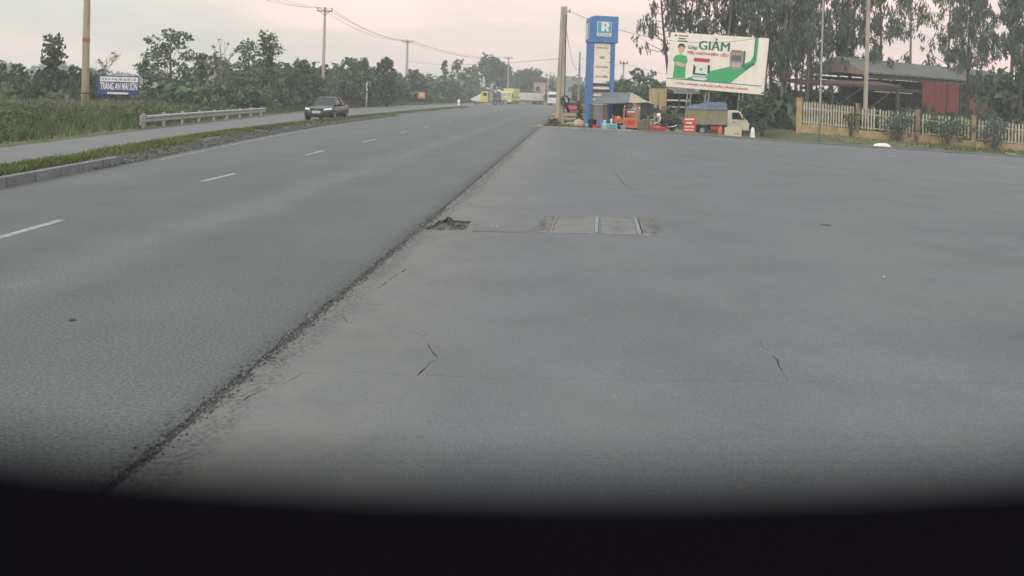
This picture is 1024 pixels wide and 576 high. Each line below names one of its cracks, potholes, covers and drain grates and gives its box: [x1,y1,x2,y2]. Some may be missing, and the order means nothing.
manhole cover [553,216,599,233]
manhole cover [599,217,642,234]
crack [239,267,411,403]
pothole [426,216,471,230]
